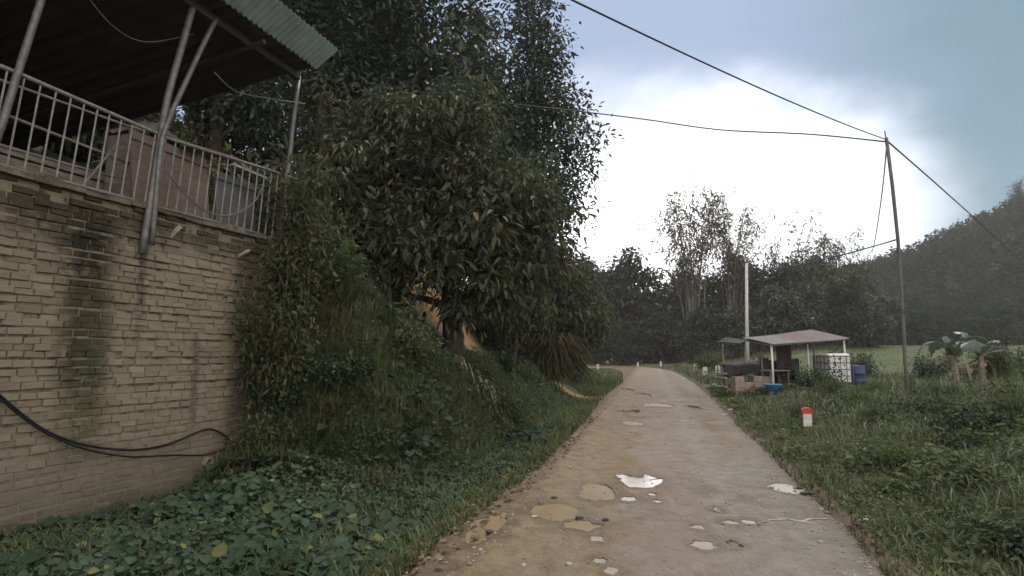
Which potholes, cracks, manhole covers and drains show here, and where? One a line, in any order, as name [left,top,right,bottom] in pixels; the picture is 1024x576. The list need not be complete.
pothole [524,501,584,522]
pothole [558,518,610,533]
pothole [684,539,722,552]
pothole [716,518,745,526]
pothole [460,510,512,546]
pothole [575,483,619,502]
pothole [613,473,667,489]
pothole [762,482,807,496]
